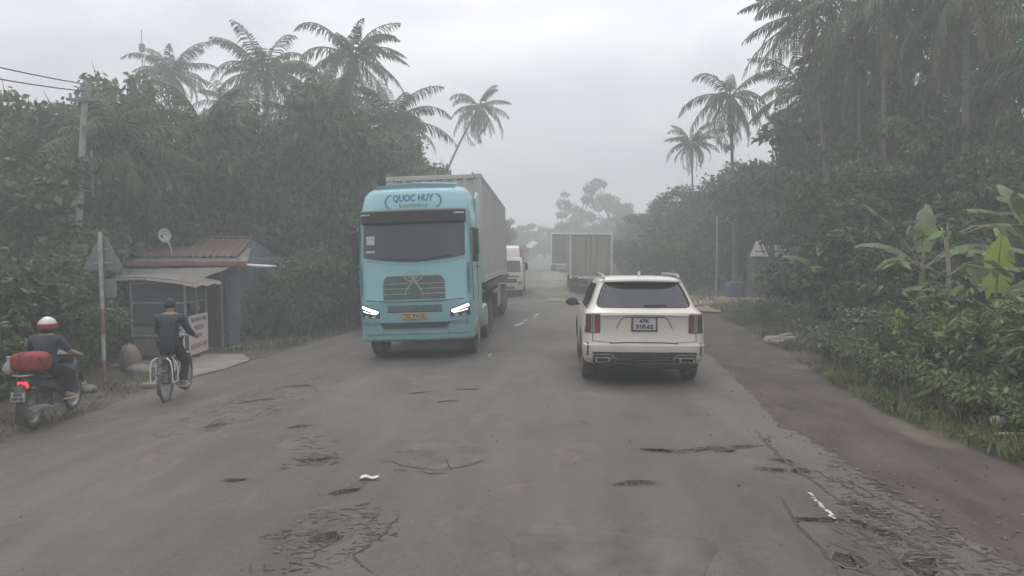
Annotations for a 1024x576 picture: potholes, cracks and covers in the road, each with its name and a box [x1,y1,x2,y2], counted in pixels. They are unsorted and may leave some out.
pothole [789,467,814,475]
crack [249,483,400,573]
pothole [611,479,659,487]
pothole [294,456,340,464]
pothole [325,487,366,497]
crack [645,431,1022,576]
pothole [794,516,848,524]
